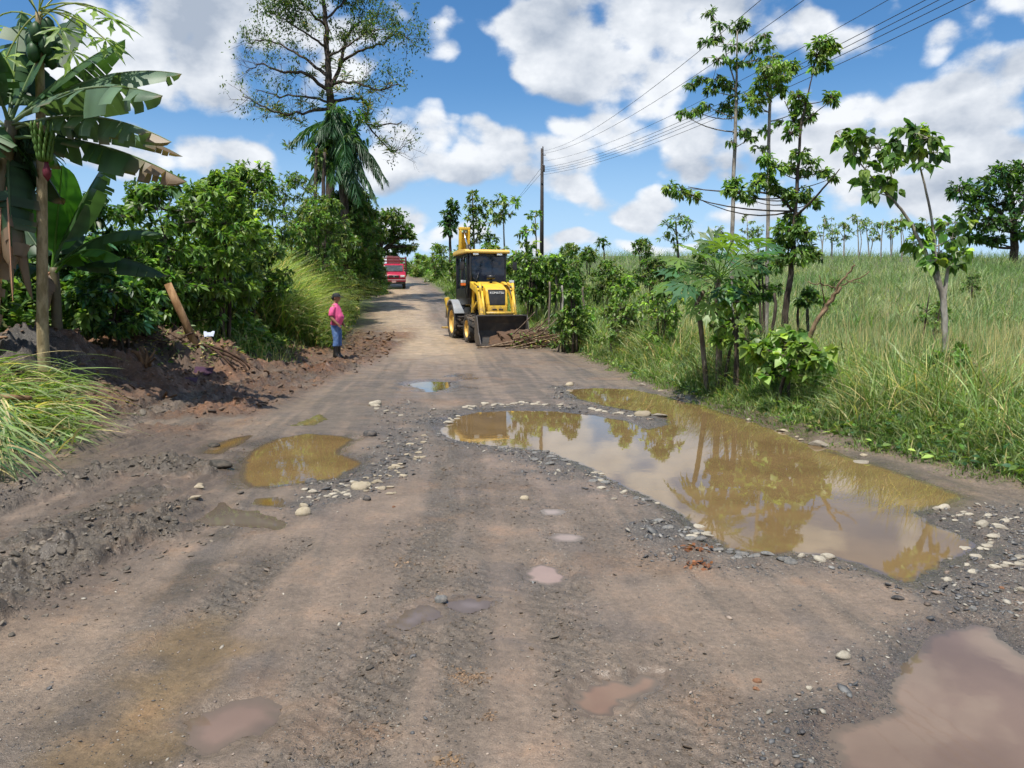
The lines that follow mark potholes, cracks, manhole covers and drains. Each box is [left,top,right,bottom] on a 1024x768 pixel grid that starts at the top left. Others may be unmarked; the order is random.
pothole [440,594,500,614]
pothole [382,600,449,631]
pothole [397,379,463,392]
pothole [175,689,295,759]
pothole [560,665,672,720]
pothole [194,434,255,454]
pothole [227,430,375,489]
pothole [791,608,1024,768]
pothole [179,500,292,530]
pothole [426,385,1005,589]
